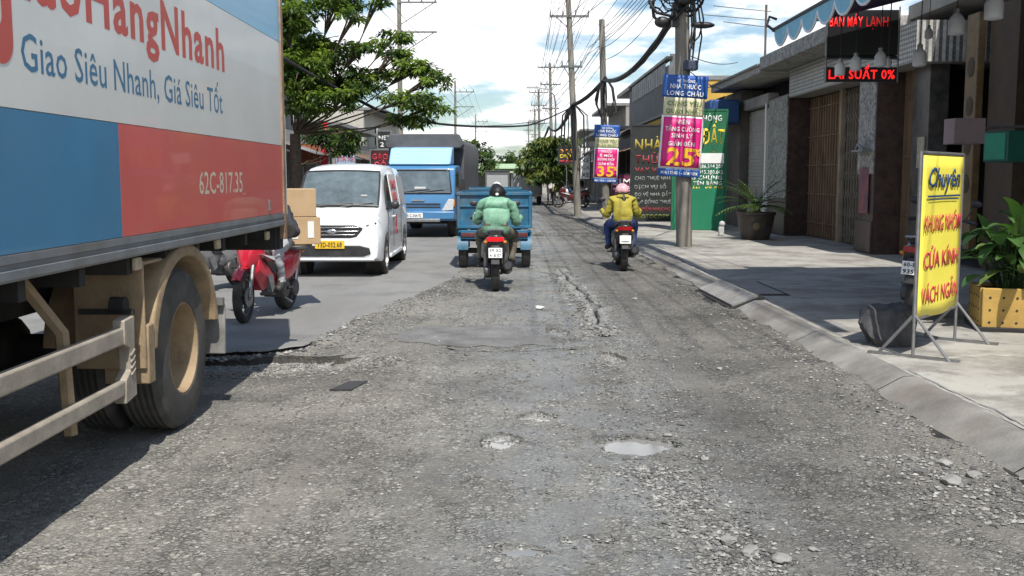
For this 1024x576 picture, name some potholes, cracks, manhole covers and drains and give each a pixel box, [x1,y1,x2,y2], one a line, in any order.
pothole [204,353,380,377]
crack [445,264,617,352]
pothole [465,426,536,459]
pothole [586,347,640,370]
pothole [501,409,572,427]
pothole [575,432,705,460]
